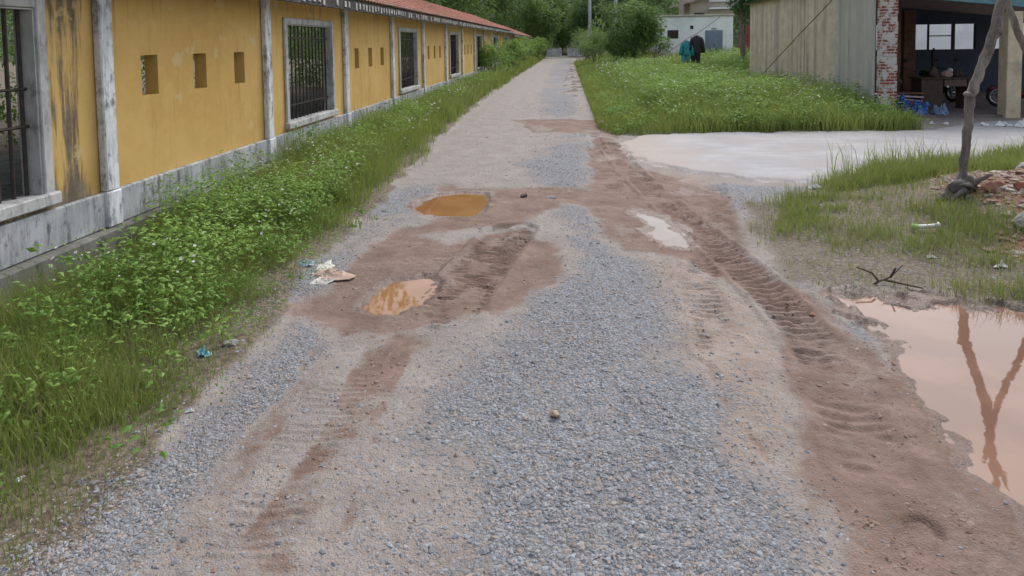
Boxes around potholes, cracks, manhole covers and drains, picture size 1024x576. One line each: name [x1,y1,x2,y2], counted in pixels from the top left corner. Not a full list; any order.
pothole [352,272,447,317]
pothole [628,209,698,249]
pothole [406,190,494,217]
